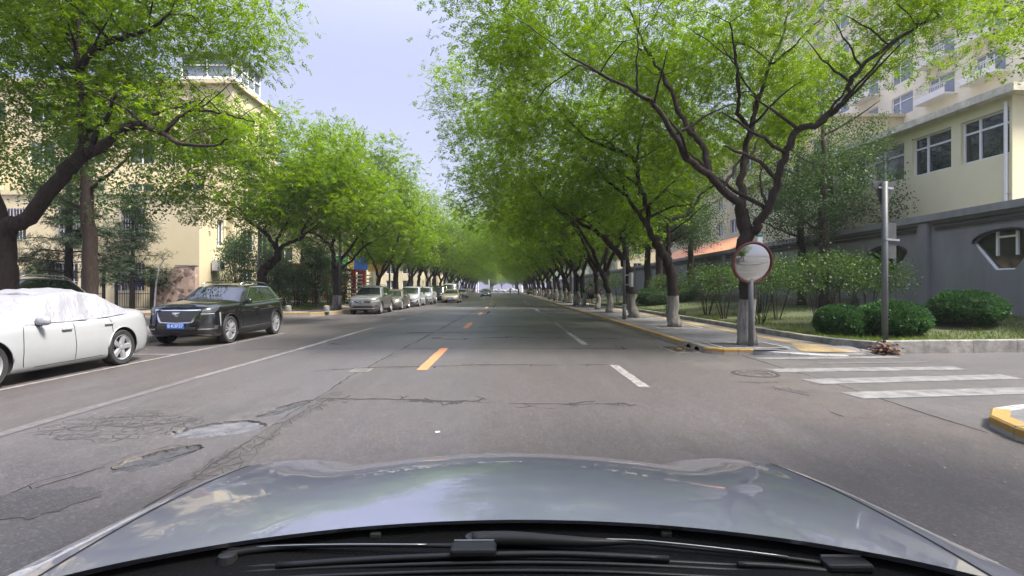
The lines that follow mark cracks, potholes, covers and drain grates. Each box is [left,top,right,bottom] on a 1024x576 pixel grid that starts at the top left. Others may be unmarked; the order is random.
drain grate [683,341,712,353]
pothole [168,420,268,438]
crack [8,392,636,494]
pothole [108,444,205,473]
